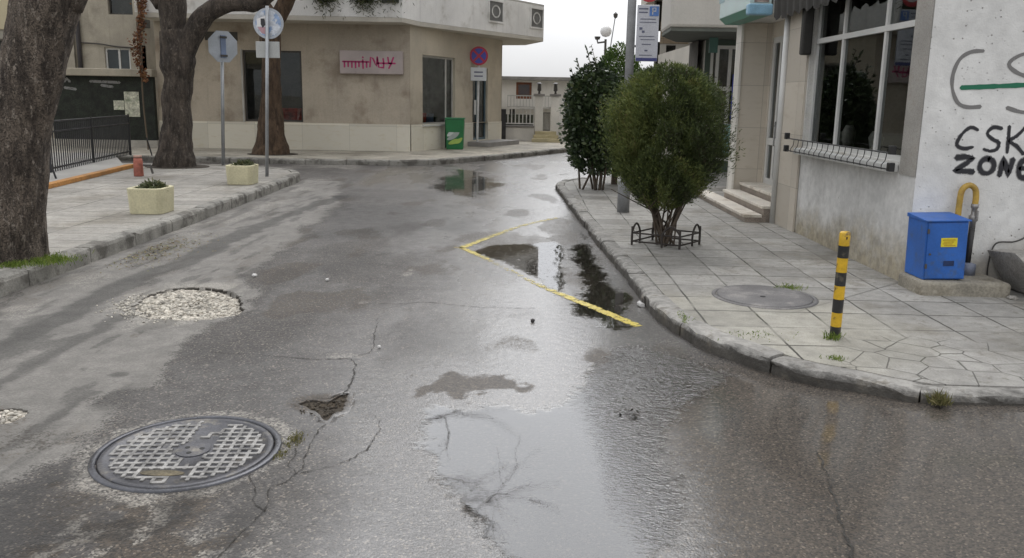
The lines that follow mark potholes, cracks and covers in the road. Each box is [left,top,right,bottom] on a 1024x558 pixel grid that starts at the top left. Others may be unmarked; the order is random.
manhole cover [88,416,282,493]
pothole [0,405,39,427]
crack [816,451,854,558]
crack [343,323,378,395]
pothole [95,286,251,325]
pothole [290,391,354,423]
manhole cover [712,285,819,310]
crack [166,420,381,558]
